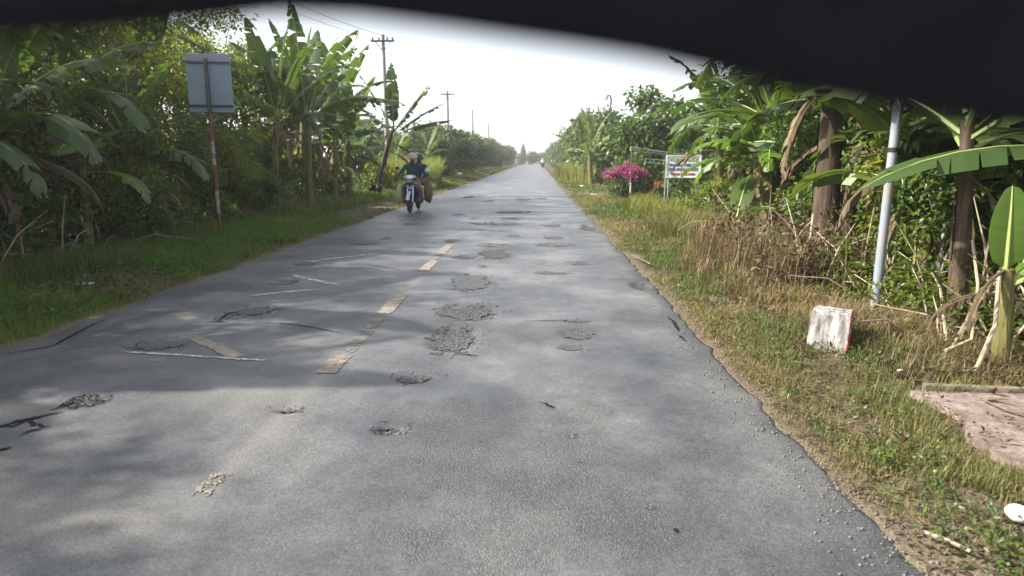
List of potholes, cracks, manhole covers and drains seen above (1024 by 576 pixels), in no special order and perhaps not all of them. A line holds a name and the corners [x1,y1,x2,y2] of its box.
pothole [563,331,595,340]
crack [8,318,107,354]
pothole [477,250,514,260]
pothole [432,302,505,321]
crack [210,308,340,333]
pothole [229,305,281,315]
pothole [396,371,435,385]
crack [0,394,113,450]
pothole [424,324,483,355]
pothole [448,274,497,292]
pothole [375,427,410,437]
pothole [124,337,191,351]
